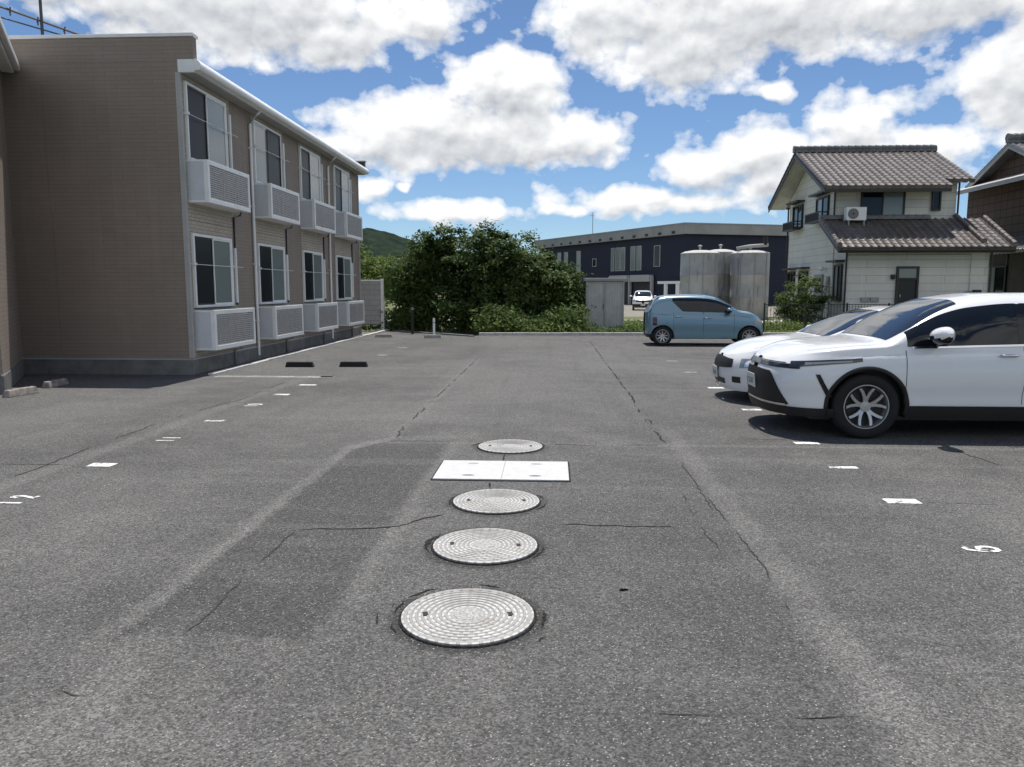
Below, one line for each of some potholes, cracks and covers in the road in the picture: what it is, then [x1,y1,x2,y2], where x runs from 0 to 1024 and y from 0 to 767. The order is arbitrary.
crack [186,492,546,632]
manhole cover [451,489,541,515]
crack [592,345,790,610]
manhole cover [398,588,537,648]
utility cover [431,460,571,482]
crack [384,361,545,446]
manhole cover [477,439,544,454]
manhole cover [431,528,539,565]
